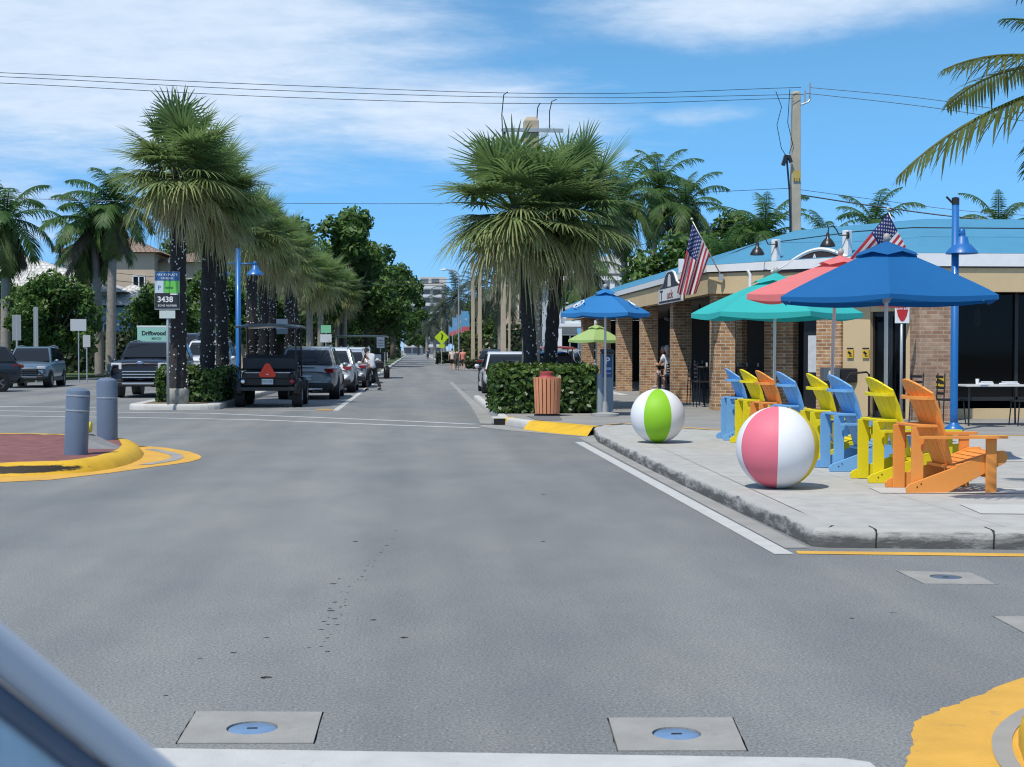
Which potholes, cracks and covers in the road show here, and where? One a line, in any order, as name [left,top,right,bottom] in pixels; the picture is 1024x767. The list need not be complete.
manhole cover [177,711,322,744]
manhole cover [609,717,746,752]
manhole cover [994,616,1024,633]
manhole cover [897,571,997,585]
